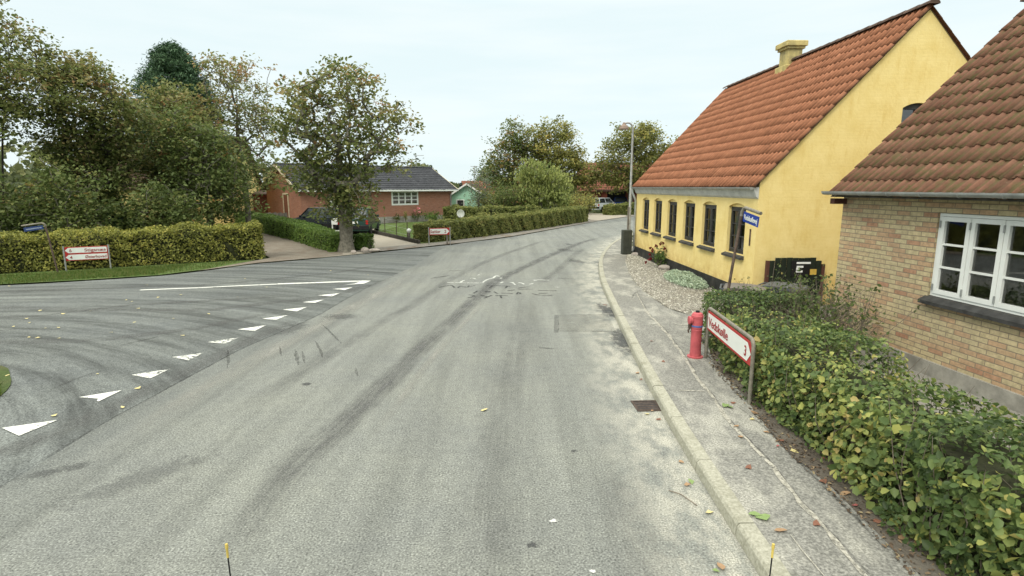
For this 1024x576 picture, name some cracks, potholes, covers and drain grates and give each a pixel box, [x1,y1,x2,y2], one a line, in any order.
drain grate [630,400,661,412]
